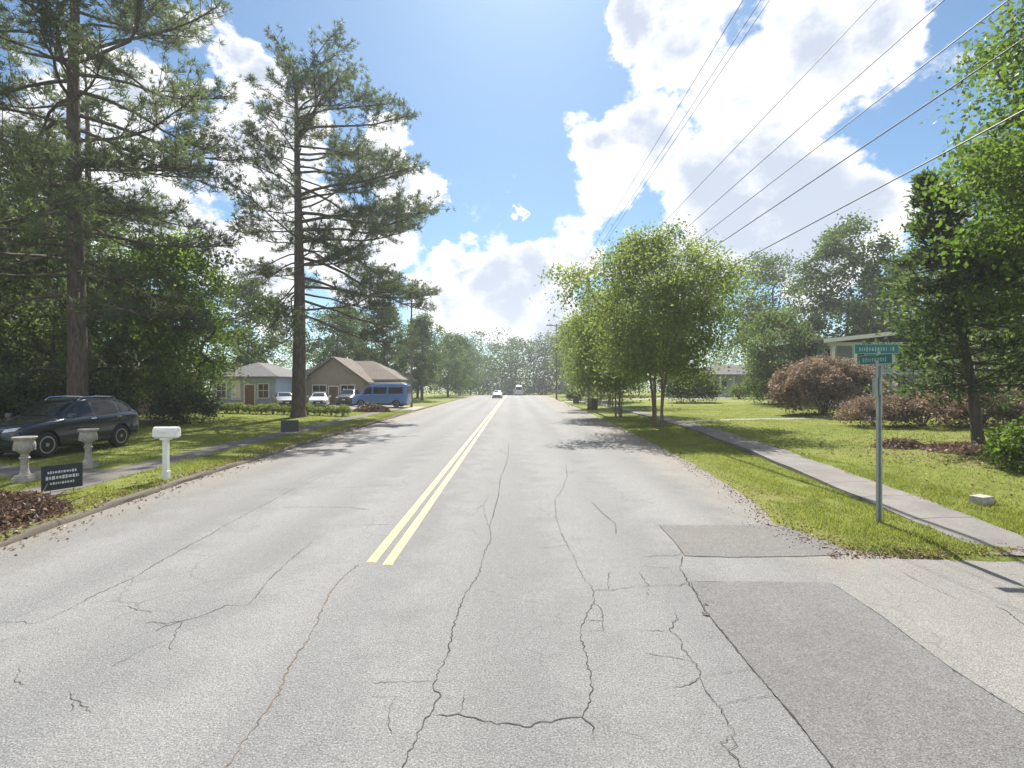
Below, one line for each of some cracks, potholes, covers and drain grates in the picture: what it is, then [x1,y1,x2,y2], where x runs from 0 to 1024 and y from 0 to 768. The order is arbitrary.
crack [649,613,770,768]
crack [114,542,312,665]
crack [374,445,705,768]
crack [5,478,318,624]
